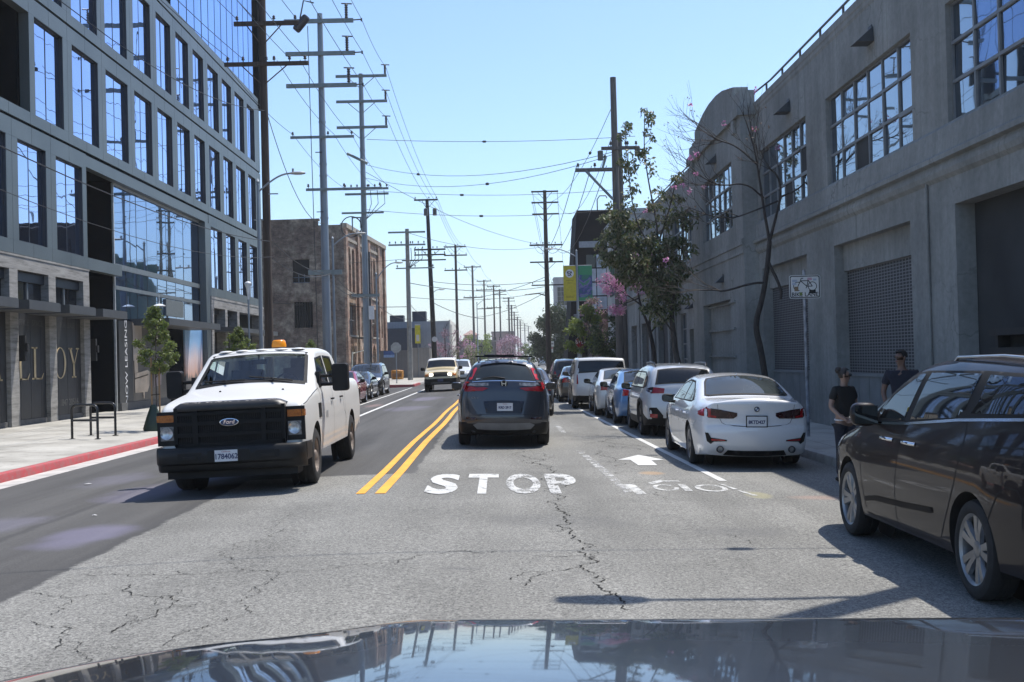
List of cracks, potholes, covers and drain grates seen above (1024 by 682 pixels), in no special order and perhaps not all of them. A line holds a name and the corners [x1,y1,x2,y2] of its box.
crack [73,516,494,645]
crack [31,592,97,664]
crack [510,450,631,610]
